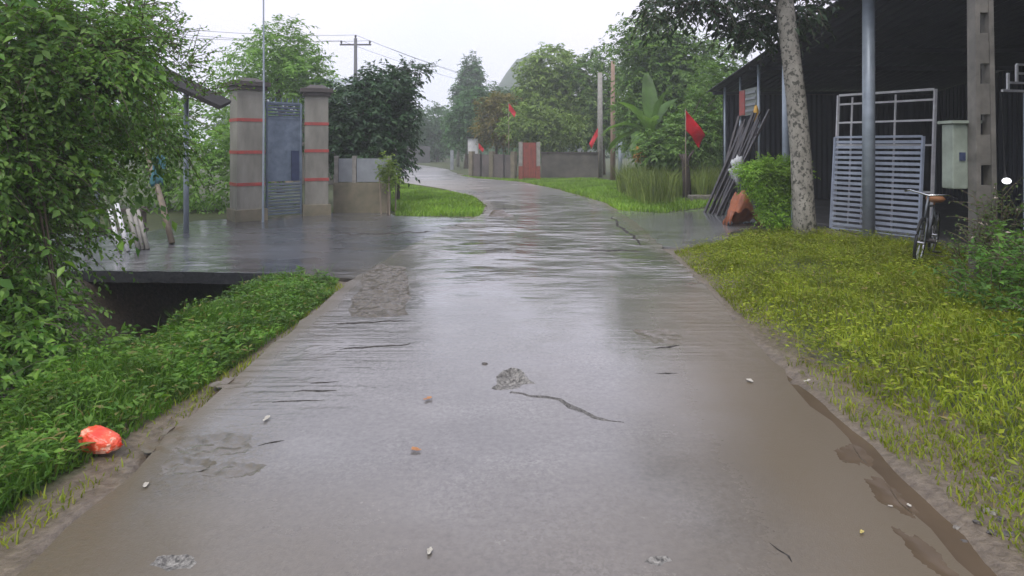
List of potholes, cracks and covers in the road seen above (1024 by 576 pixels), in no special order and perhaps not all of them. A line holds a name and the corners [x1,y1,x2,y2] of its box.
crack [511,391,624,423]
pothole [491,367,536,390]
pothole [645,556,672,566]
crack [590,217,641,252]
pothole [150,554,197,571]
crack [272,381,339,403]
